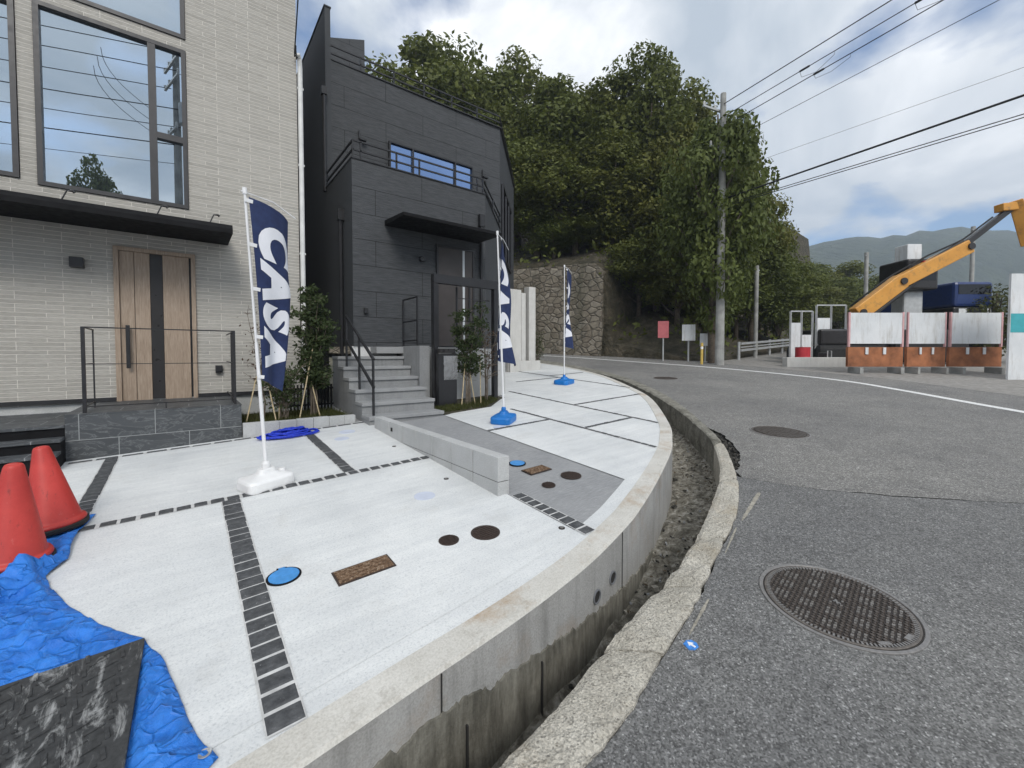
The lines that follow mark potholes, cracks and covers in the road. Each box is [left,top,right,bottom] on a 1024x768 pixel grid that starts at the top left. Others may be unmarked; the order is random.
manhole cover [750,425,811,439]
manhole cover [759,564,931,655]
crack [747,478,1014,503]
